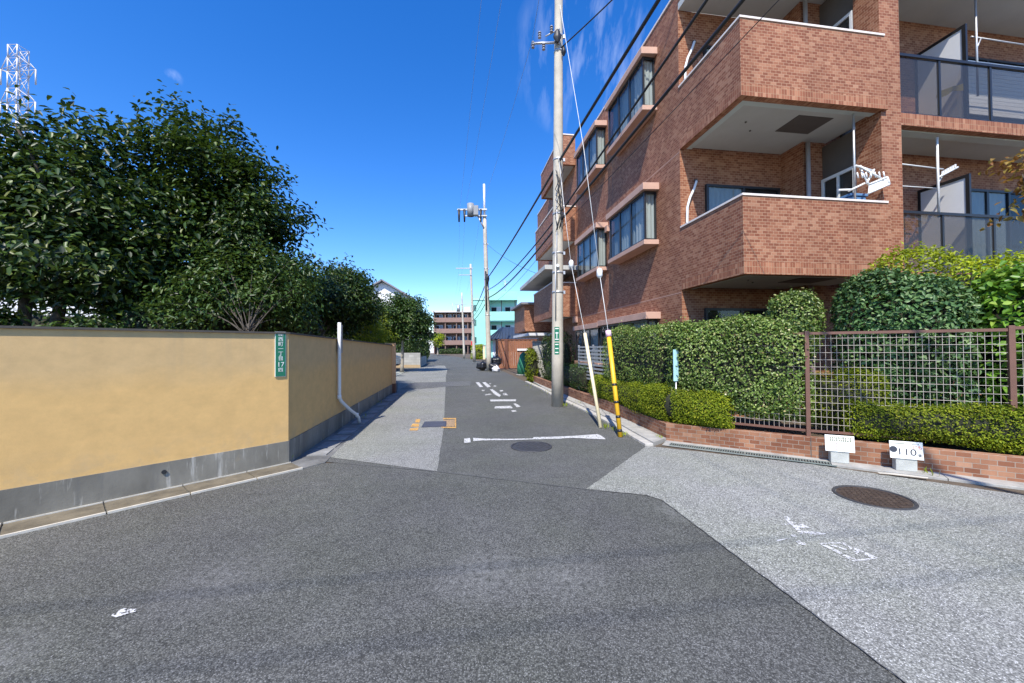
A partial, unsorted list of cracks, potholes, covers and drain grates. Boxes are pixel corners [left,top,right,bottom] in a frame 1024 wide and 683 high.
drain grate [788,457,837,467]
drain grate [705,447,745,455]
drain grate [745,452,788,460]
manhole cover [832,485,919,511]
manhole cover [510,441,552,452]
